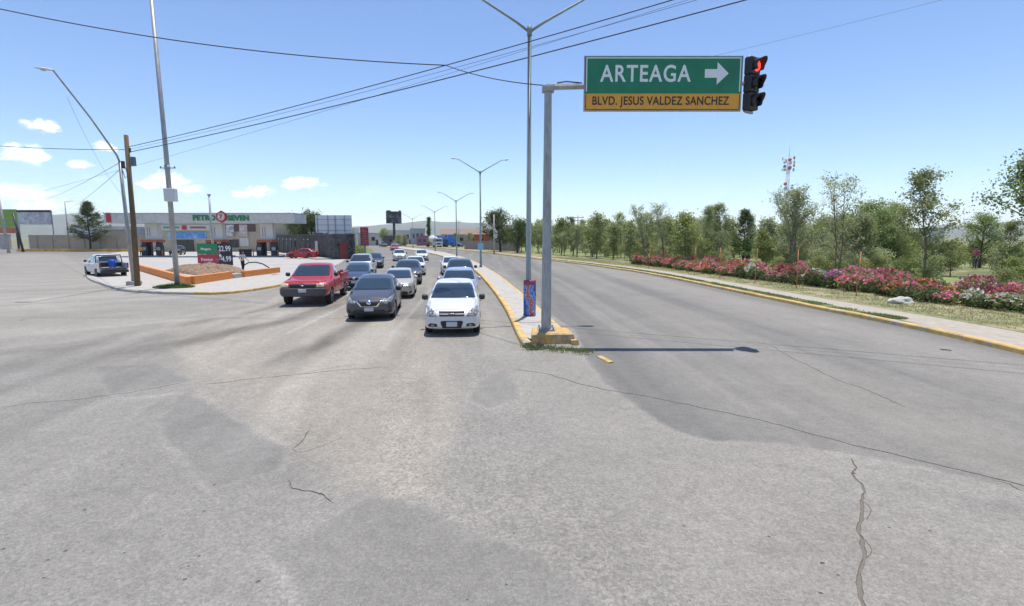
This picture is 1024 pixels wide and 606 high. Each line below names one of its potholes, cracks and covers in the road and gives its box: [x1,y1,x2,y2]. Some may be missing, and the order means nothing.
crack [288,480,332,502]
crack [210,364,380,384]
crack [851,459,872,606]
crack [773,346,902,406]
crack [2,382,182,408]
